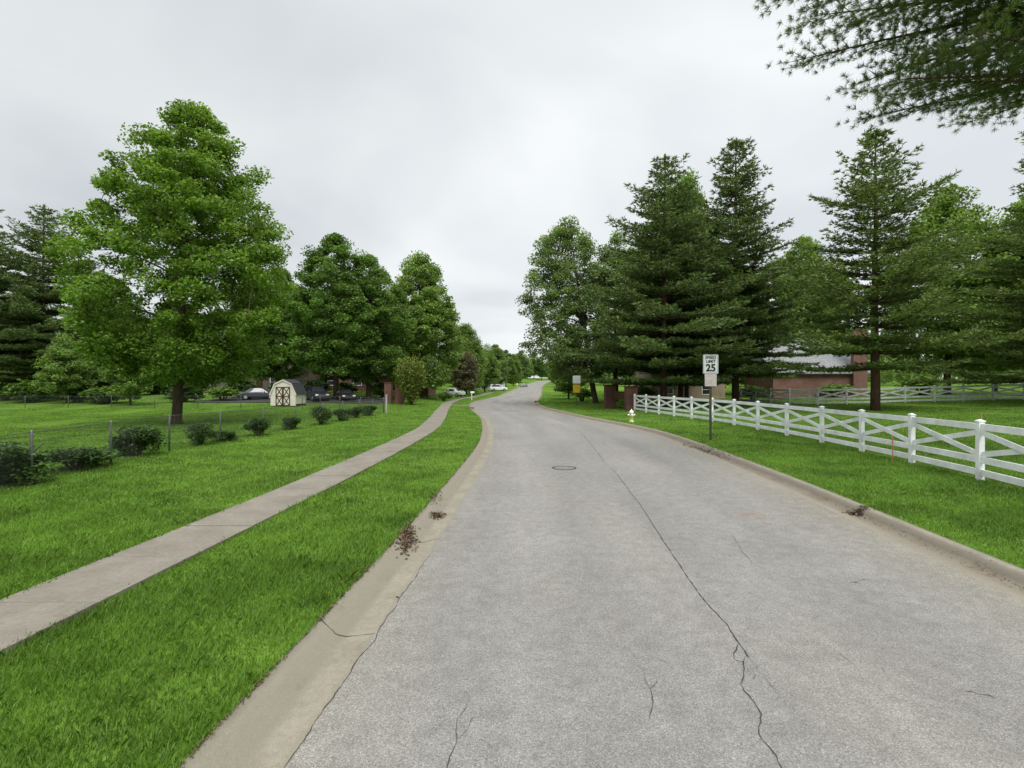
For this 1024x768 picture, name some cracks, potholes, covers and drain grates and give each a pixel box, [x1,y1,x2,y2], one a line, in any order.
crack [447,697,474,767]
crack [612,469,795,768]
